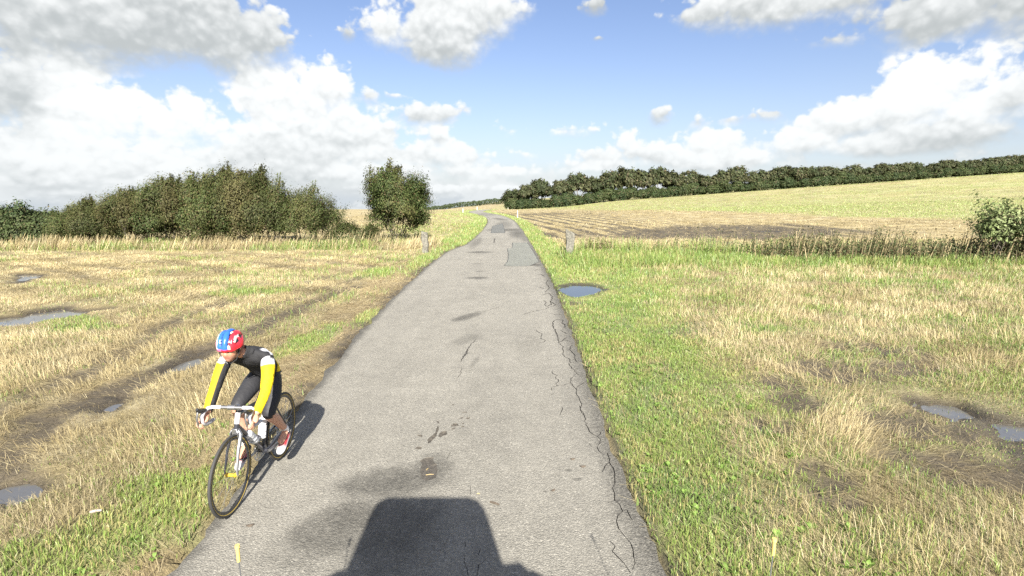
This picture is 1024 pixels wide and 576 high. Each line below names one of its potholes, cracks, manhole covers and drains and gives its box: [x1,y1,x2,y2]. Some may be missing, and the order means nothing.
pothole [420,457,438,481]
crack [523,264,635,573]
